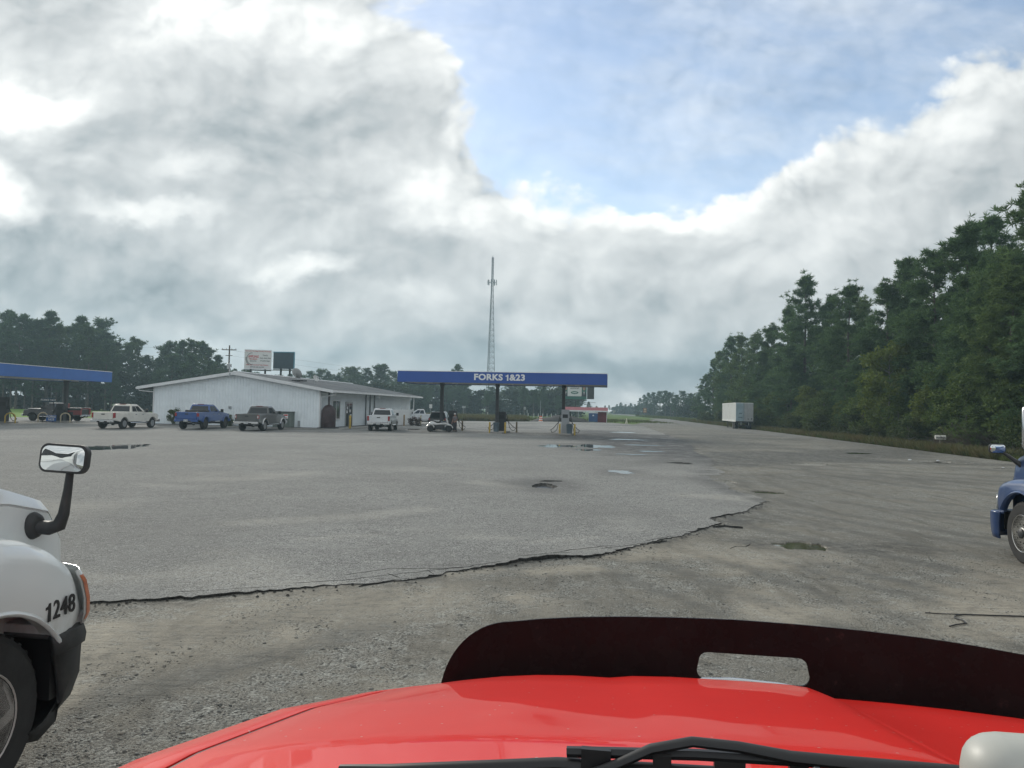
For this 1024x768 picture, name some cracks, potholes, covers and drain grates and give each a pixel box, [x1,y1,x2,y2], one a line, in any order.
crack [90,501,767,606]
pothole [771,541,828,551]
